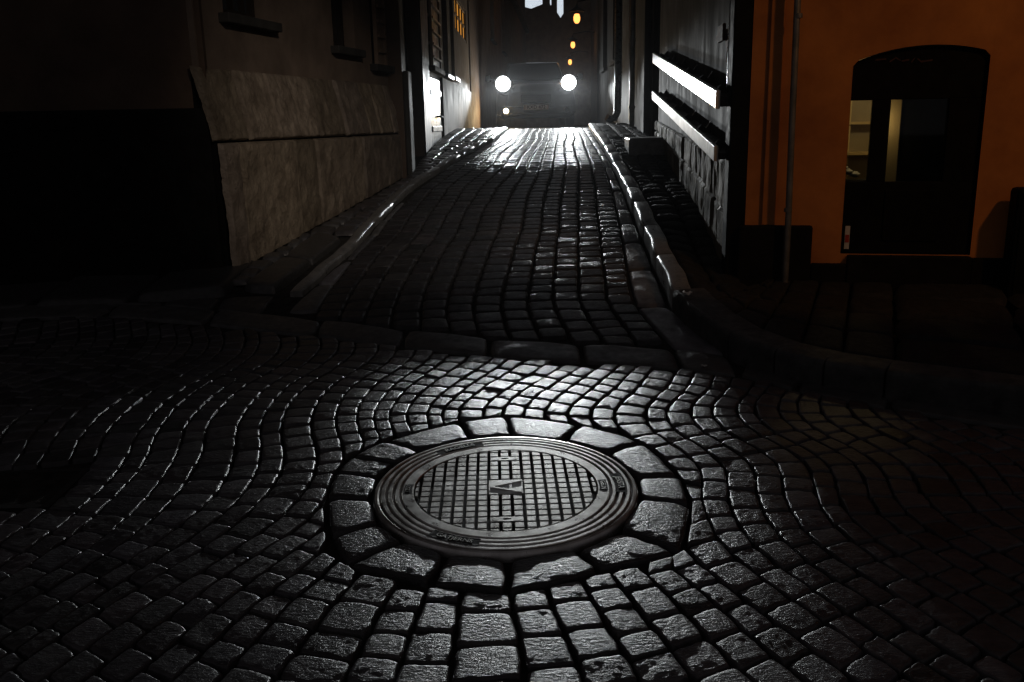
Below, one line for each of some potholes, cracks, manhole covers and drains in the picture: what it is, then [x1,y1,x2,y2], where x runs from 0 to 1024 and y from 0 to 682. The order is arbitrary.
manhole cover [373,437,638,563]
